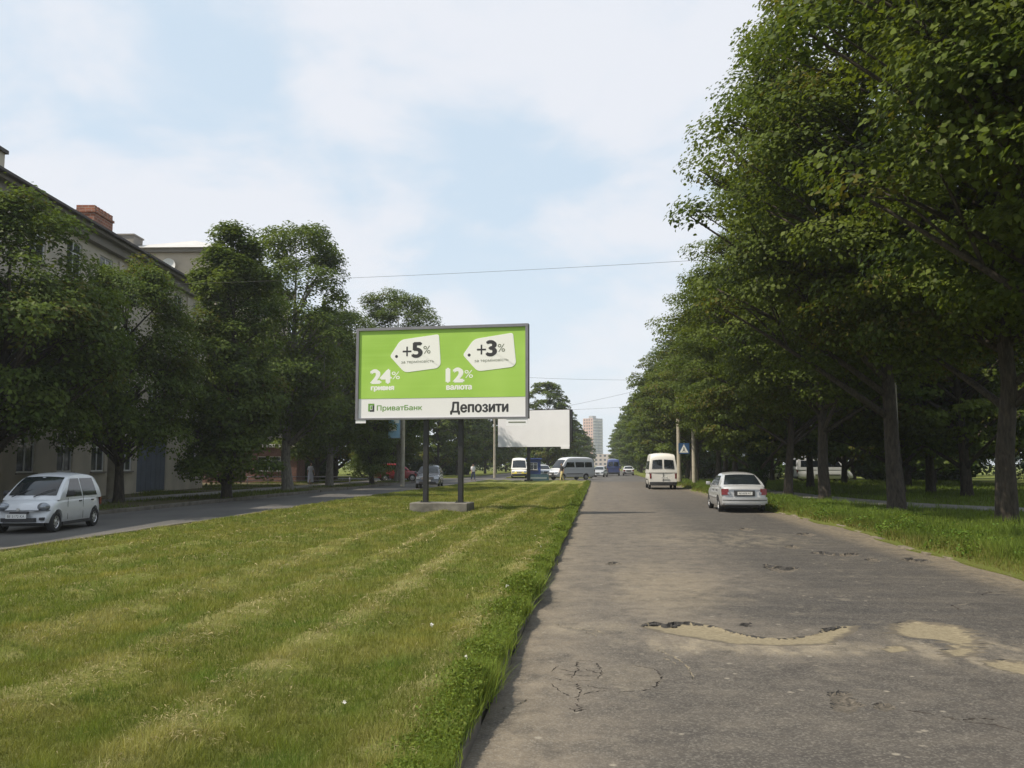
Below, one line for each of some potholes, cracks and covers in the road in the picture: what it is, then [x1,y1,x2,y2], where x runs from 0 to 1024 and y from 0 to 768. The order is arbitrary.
crack [552,649,694,712]
pothole [827,690,866,714]
pothole [763,564,800,573]
pothole [639,621,861,647]
